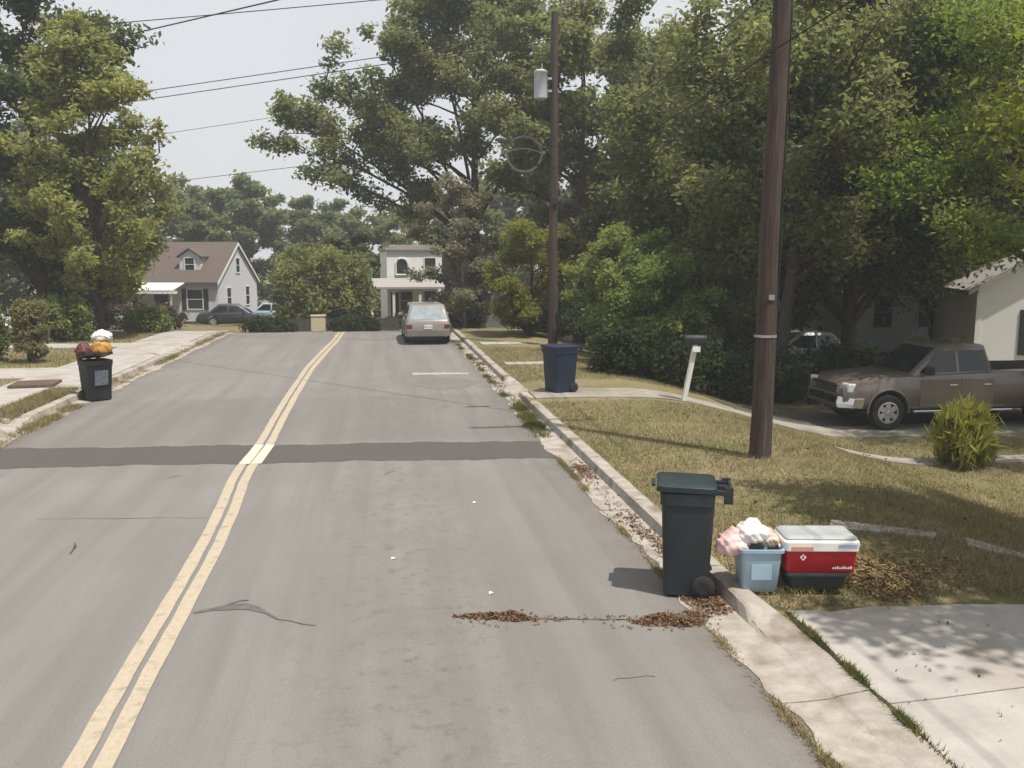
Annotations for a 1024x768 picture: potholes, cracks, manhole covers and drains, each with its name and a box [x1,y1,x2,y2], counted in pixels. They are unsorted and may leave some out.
crack [193,600,316,626]
